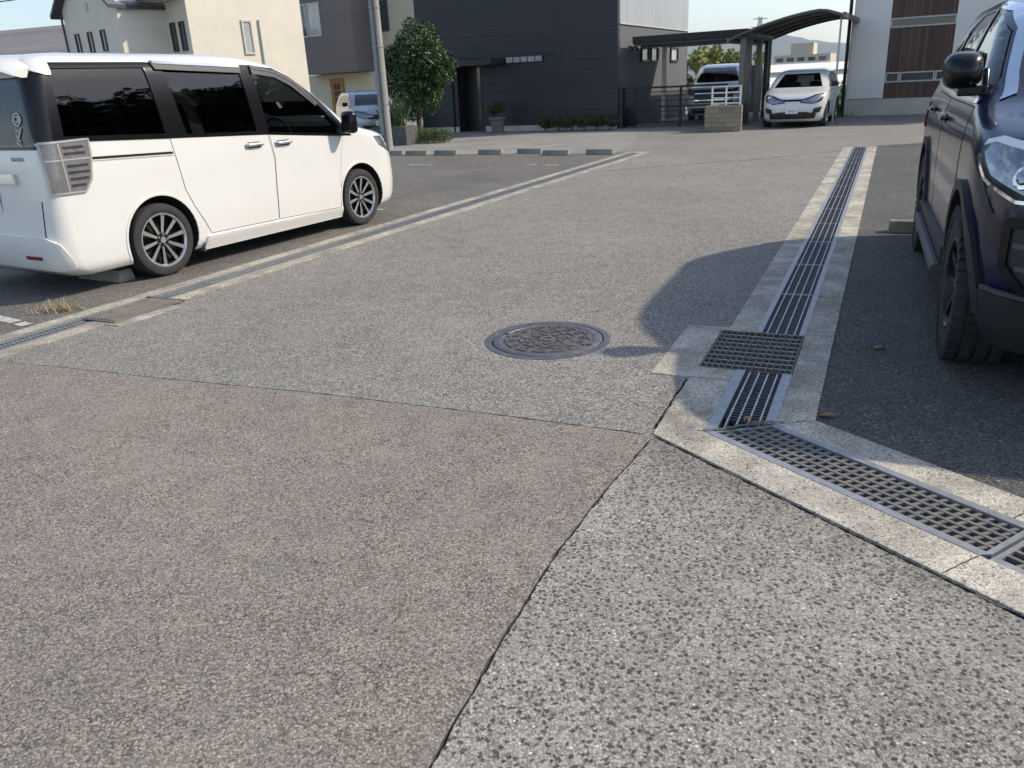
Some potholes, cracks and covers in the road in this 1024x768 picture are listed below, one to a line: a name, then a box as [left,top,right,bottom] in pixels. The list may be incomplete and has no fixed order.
drain grate [706,424,1024,559]
manhole cover [485,321,611,360]
drain grate [699,330,805,378]
drain grate [989,540,1024,575]
crack [5,362,1024,768]
